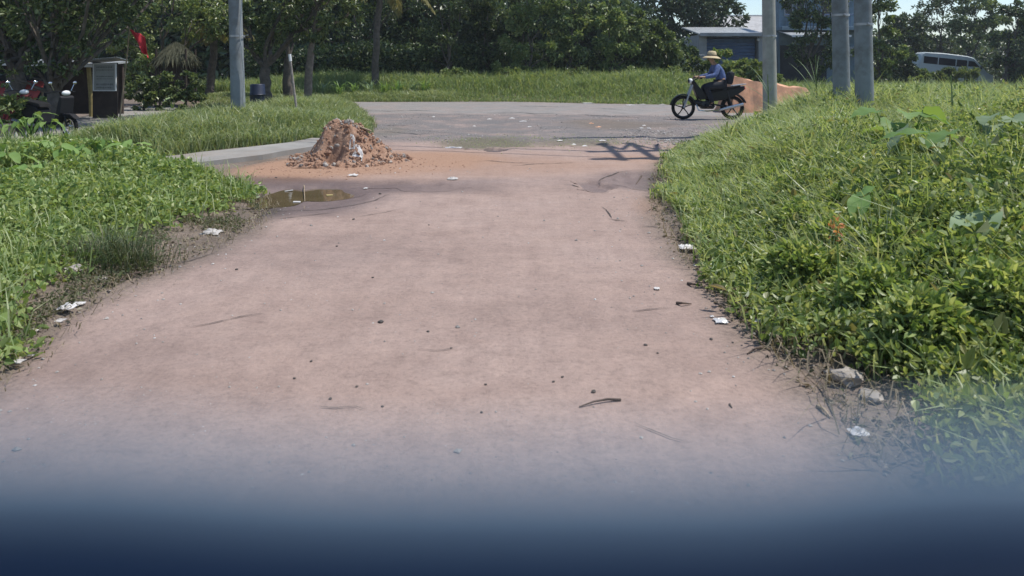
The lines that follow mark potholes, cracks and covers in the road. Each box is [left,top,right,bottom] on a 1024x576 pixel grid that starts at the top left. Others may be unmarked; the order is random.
pothole [234,185,366,210]
